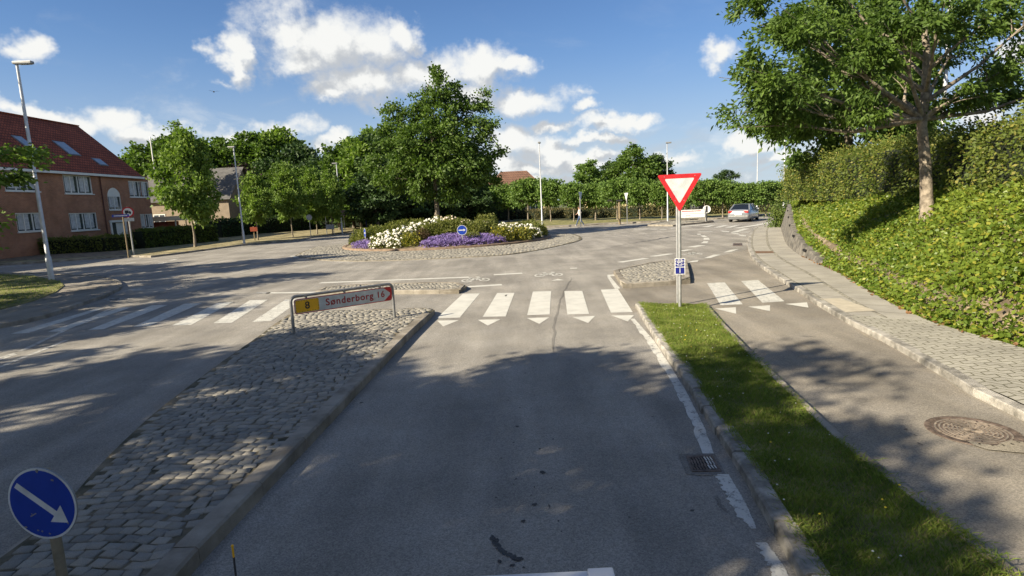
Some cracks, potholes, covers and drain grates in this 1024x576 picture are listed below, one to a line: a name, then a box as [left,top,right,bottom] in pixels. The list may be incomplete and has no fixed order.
drain grate [686,455,722,472]
manhole cover [924,416,1024,446]
